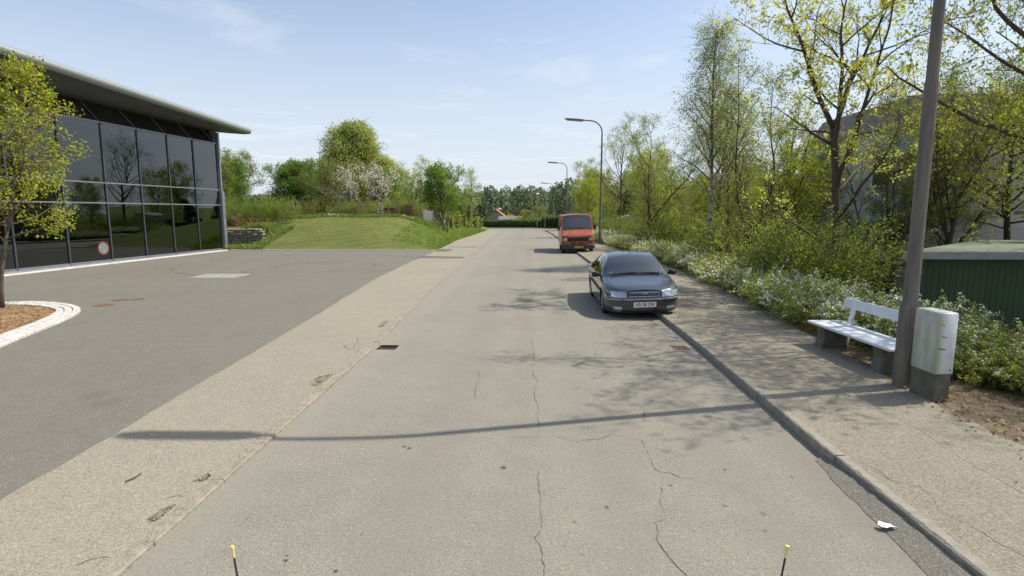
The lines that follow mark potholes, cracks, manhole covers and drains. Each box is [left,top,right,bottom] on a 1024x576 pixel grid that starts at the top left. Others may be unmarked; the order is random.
pothole [146,504,176,525]
crack [655,488,687,576]
pothole [310,374,332,387]
crack [510,341,692,479]
crack [534,472,546,574]
